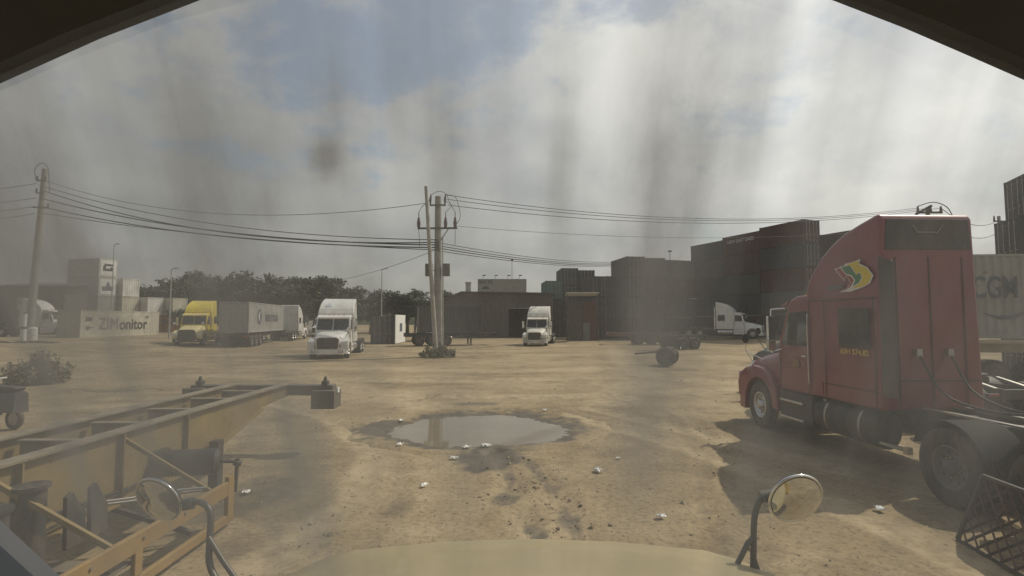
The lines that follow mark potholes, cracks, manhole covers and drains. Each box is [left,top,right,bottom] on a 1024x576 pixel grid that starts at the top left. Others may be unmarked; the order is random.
pothole [346,407,613,457]
